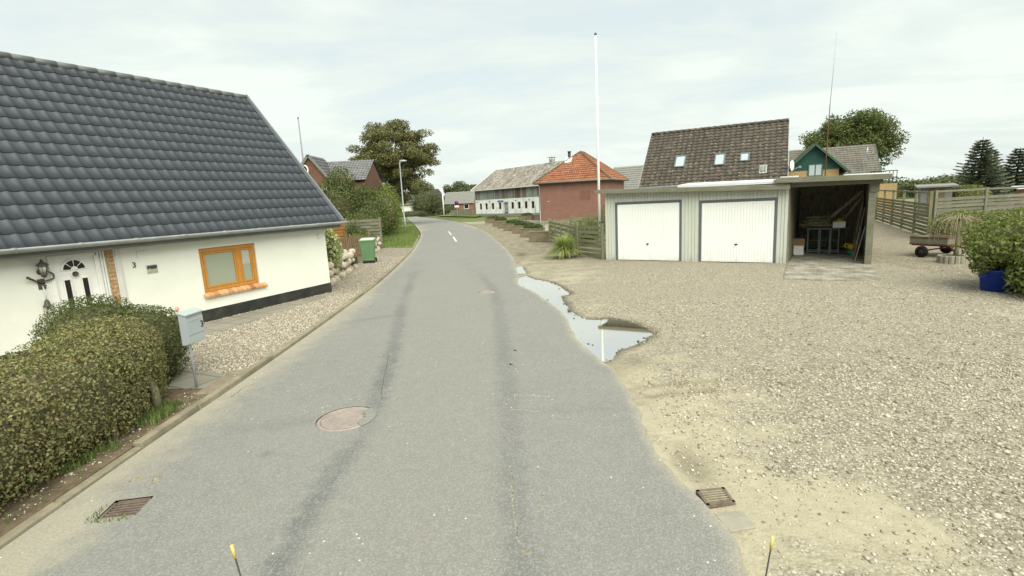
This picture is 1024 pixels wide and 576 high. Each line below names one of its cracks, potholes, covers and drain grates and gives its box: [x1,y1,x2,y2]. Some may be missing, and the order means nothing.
drain grate [98,497,152,519]
crack [509,466,520,544]
manhole cover [316,407,377,431]
drain grate [696,487,736,509]
